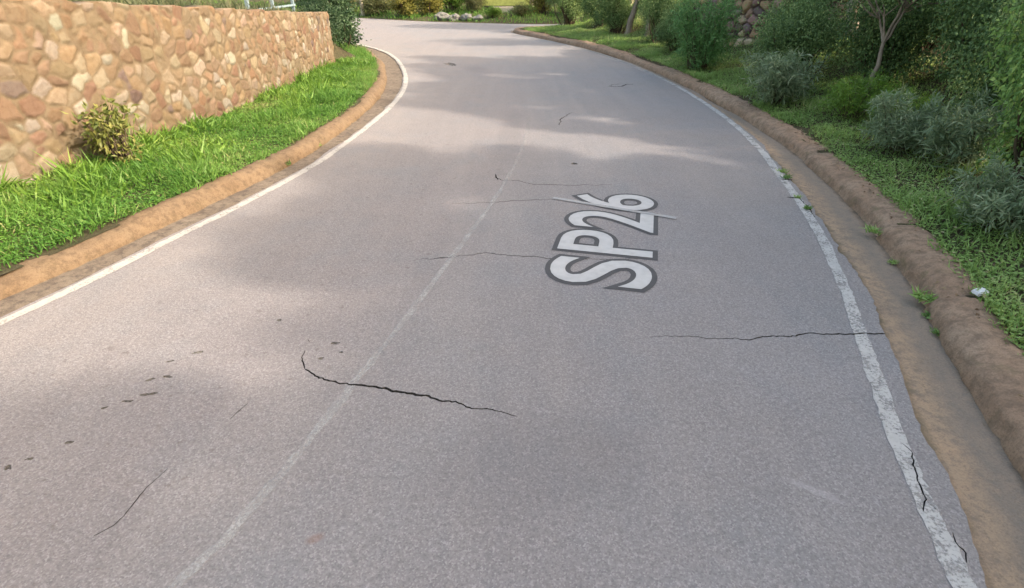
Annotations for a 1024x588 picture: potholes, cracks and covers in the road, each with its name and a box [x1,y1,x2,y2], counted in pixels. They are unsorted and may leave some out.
crack [301,340,514,416]
crack [453,174,611,204]
crack [908,448,967,563]
crack [435,252,630,260]
